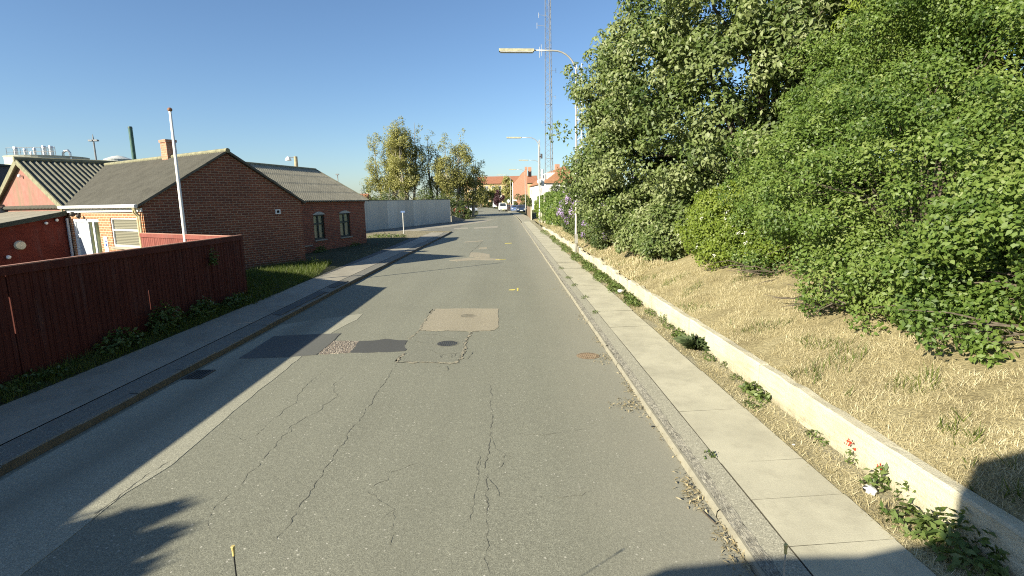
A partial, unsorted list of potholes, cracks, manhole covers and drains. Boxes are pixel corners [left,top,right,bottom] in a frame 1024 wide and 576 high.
drain grate [181,369,216,380]
crack [260,370,392,567]
crack [207,375,341,530]
crack [469,386,505,571]
